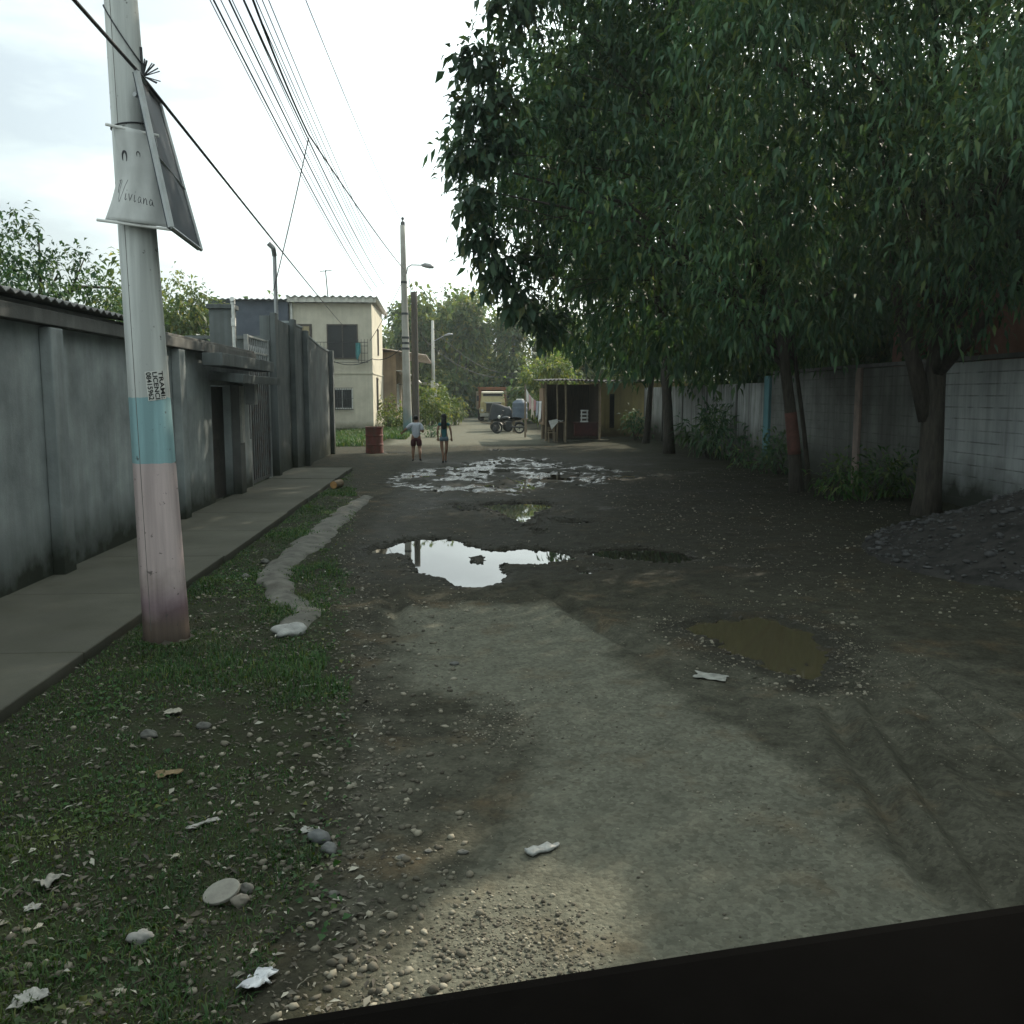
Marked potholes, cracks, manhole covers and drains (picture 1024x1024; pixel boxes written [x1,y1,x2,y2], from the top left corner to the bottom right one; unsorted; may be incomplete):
pothole [352,534,588,589]
pothole [667,608,855,692]
pothole [569,543,713,566]
pothole [374,456,665,500]
pothole [469,500,565,536]
